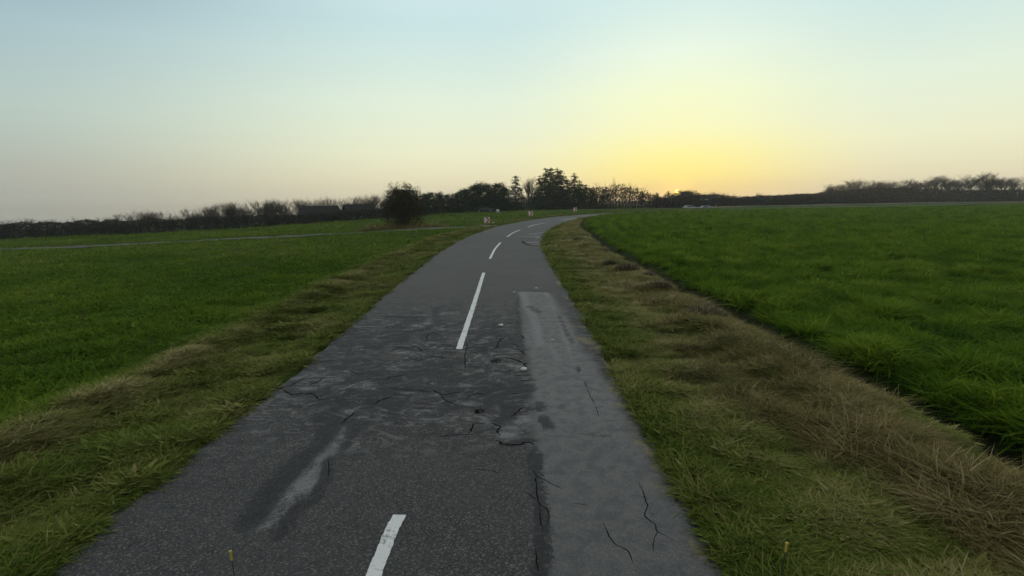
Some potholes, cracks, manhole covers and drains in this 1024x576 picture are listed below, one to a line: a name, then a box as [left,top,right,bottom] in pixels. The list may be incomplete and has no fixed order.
crack [525,468,586,529]
crack [603,483,679,564]
crack [375,316,535,446]
crack [278,360,365,423]
